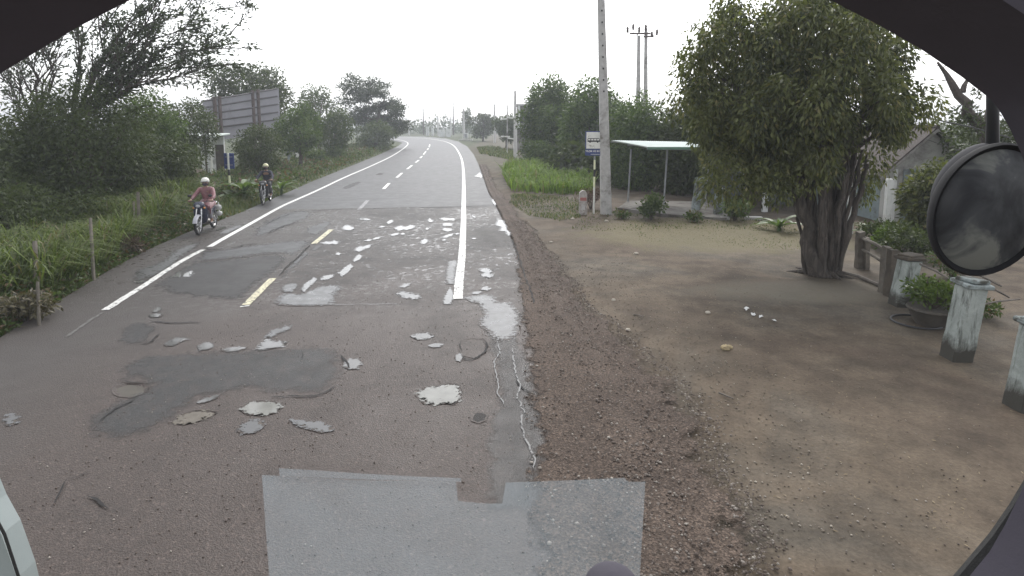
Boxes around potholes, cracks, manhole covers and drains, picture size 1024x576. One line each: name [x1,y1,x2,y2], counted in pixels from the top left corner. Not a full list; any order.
pothole [238,400,284,416]
pothole [413,383,463,406]
pothole [237,418,266,436]
pothole [471,412,489,424]
pothole [459,338,488,358]
pothole [289,418,334,433]
crack [459,334,536,468]
pothole [169,409,219,425]
pothole [343,358,363,369]
